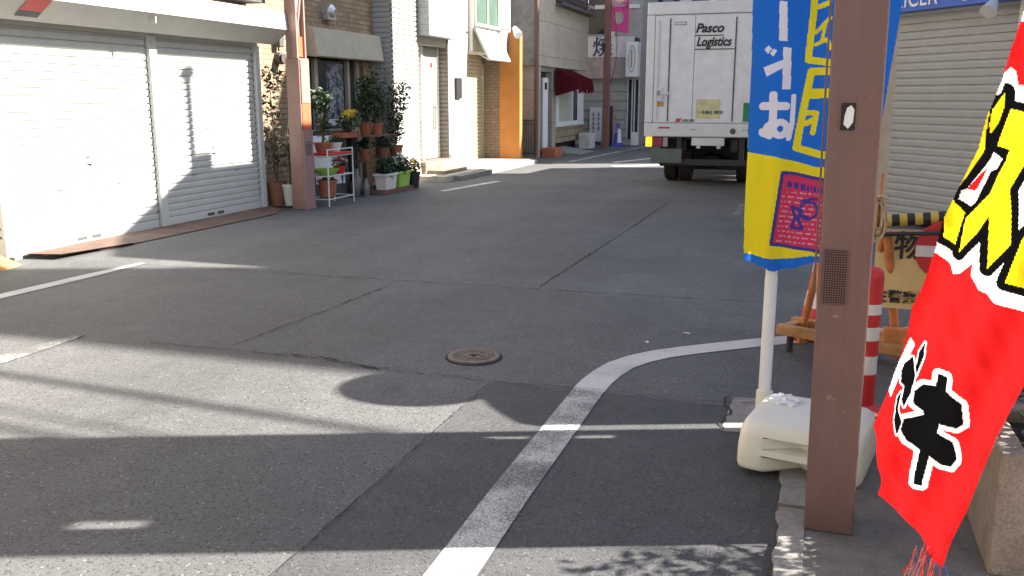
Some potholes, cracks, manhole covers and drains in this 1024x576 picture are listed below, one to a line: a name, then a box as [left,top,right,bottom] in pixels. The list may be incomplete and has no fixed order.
manhole cover [445,348,502,366]
